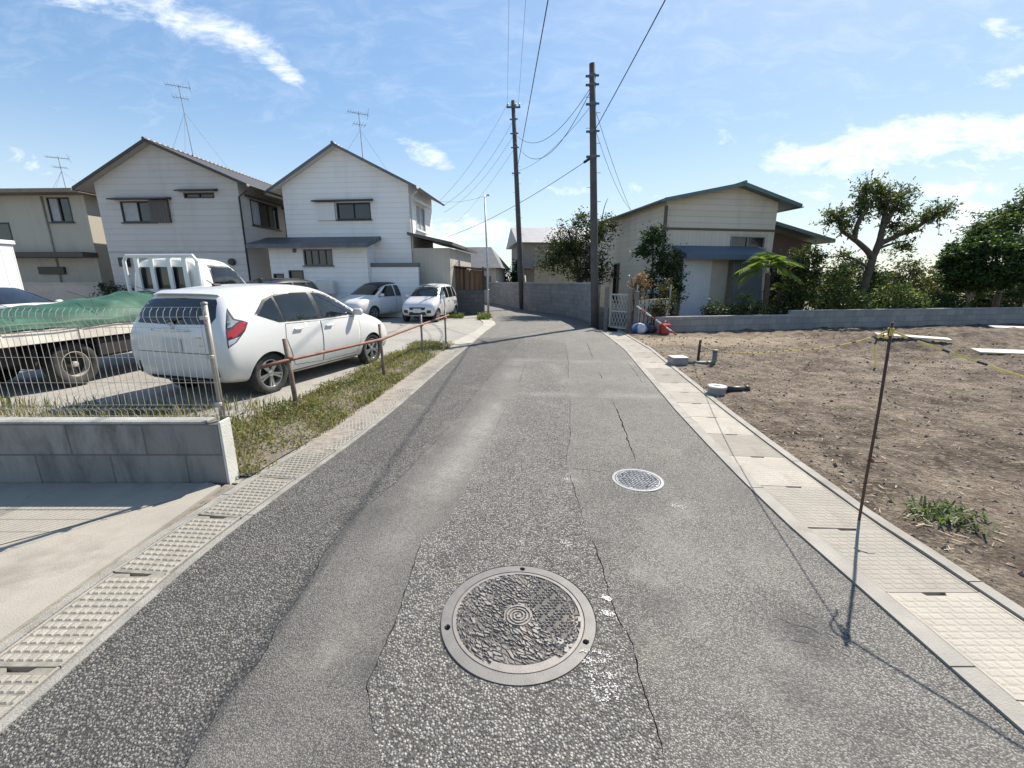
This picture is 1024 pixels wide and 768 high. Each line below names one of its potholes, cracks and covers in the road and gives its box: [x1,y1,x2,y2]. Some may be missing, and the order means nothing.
manhole cover [440,566,597,687]
manhole cover [612,469,664,492]
crack [614,404,636,461]
crack [593,542,666,768]
